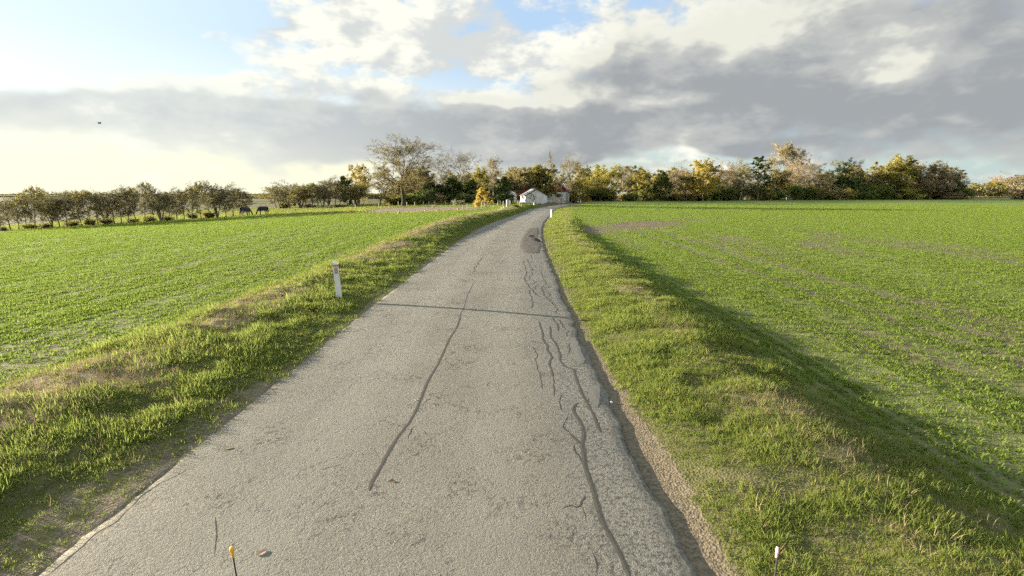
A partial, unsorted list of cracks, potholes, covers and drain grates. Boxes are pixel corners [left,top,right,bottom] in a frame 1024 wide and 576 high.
crack [522,255,592,404]
